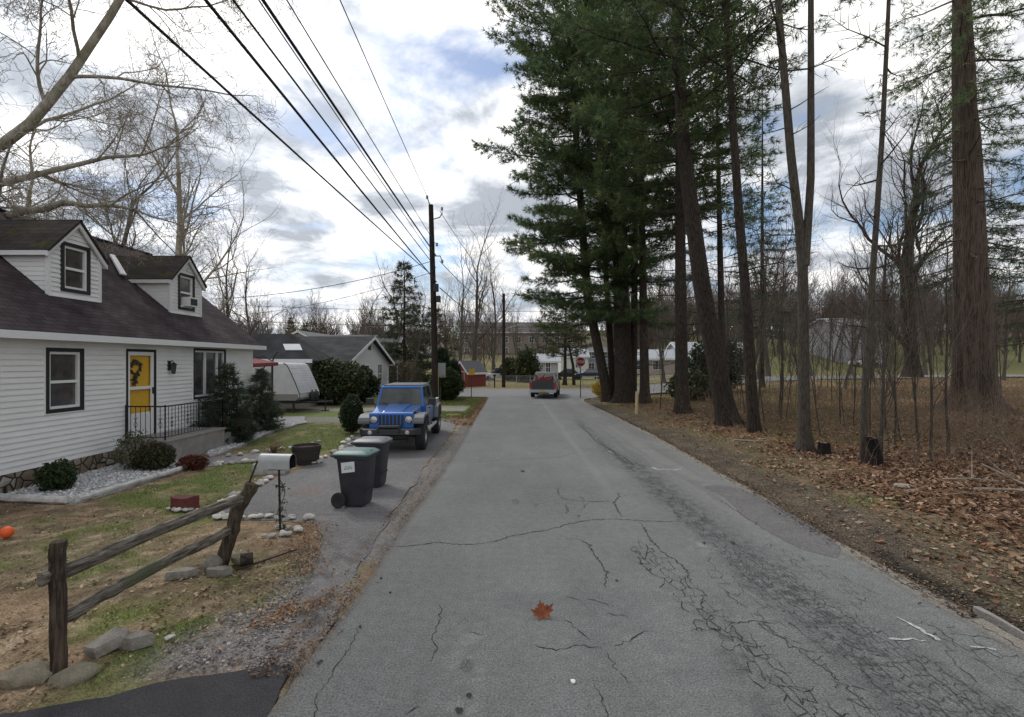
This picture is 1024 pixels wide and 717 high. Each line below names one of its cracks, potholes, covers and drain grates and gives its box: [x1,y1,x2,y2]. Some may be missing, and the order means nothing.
crack [285,611,358,717]
crack [370,425,1024,717]
